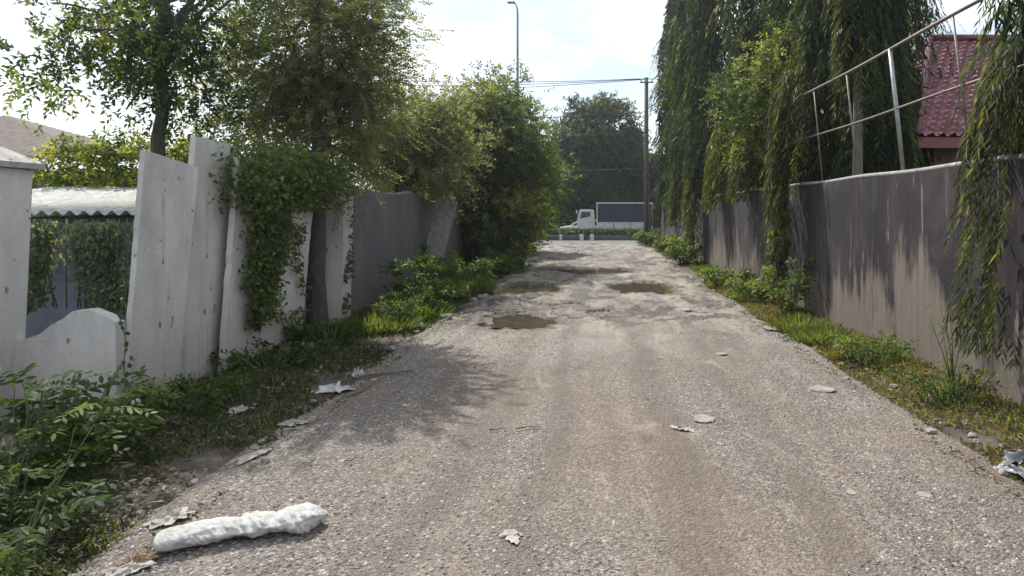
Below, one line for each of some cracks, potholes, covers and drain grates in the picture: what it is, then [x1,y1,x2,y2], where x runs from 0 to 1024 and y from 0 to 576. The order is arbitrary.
pothole [537,266,648,276]
pothole [601,279,683,295]
pothole [493,281,570,295]
pothole [467,309,568,332]
